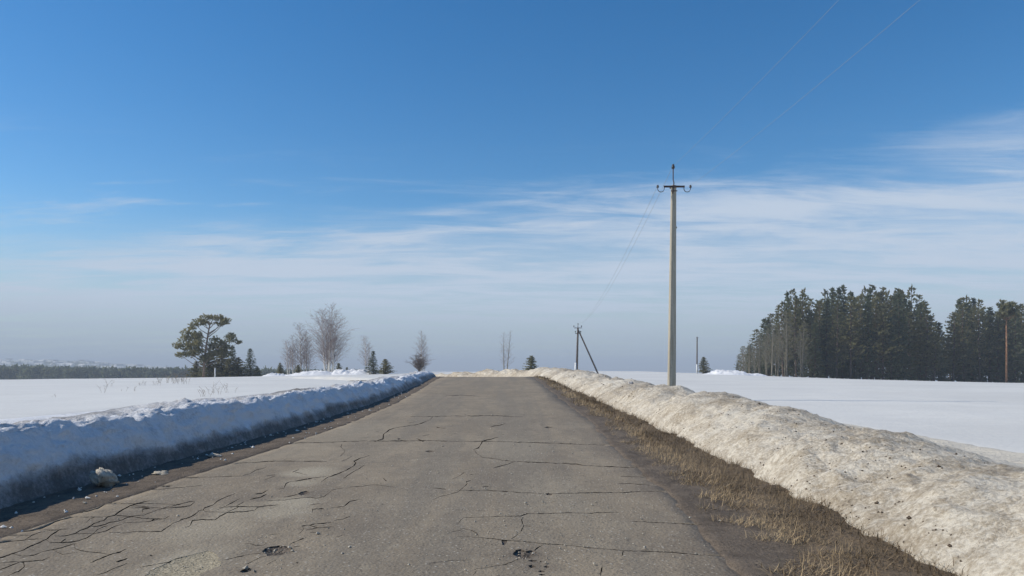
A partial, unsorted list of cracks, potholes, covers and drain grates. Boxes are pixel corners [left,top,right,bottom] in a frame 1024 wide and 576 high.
crack [448,512,713,574]
pothole [513,549,537,560]
crack [0,415,658,576]
pothole [262,545,291,556]
